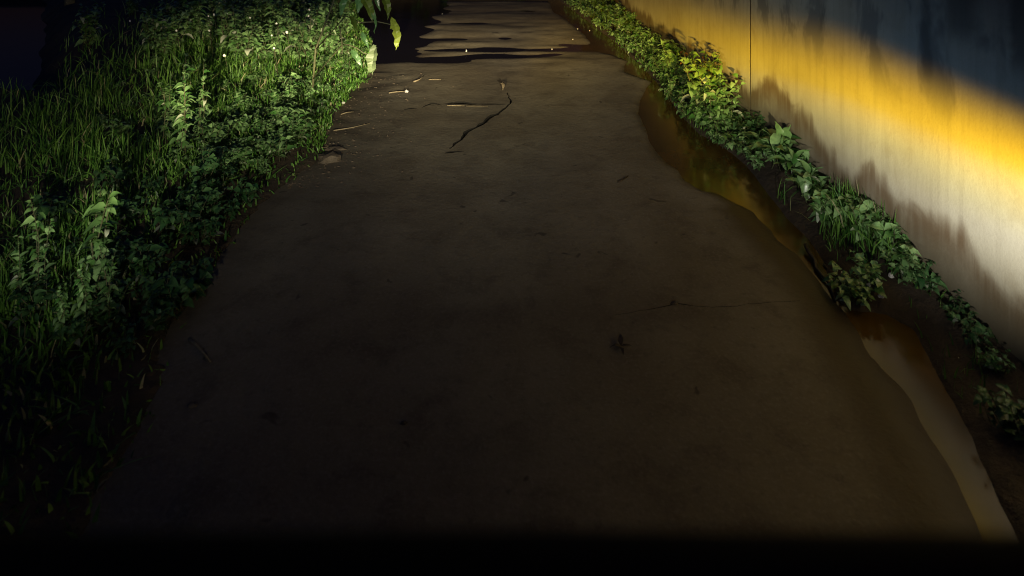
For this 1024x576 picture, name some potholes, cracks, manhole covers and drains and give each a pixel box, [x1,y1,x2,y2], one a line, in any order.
crack [404,94,512,153]
crack [618,301,790,315]
